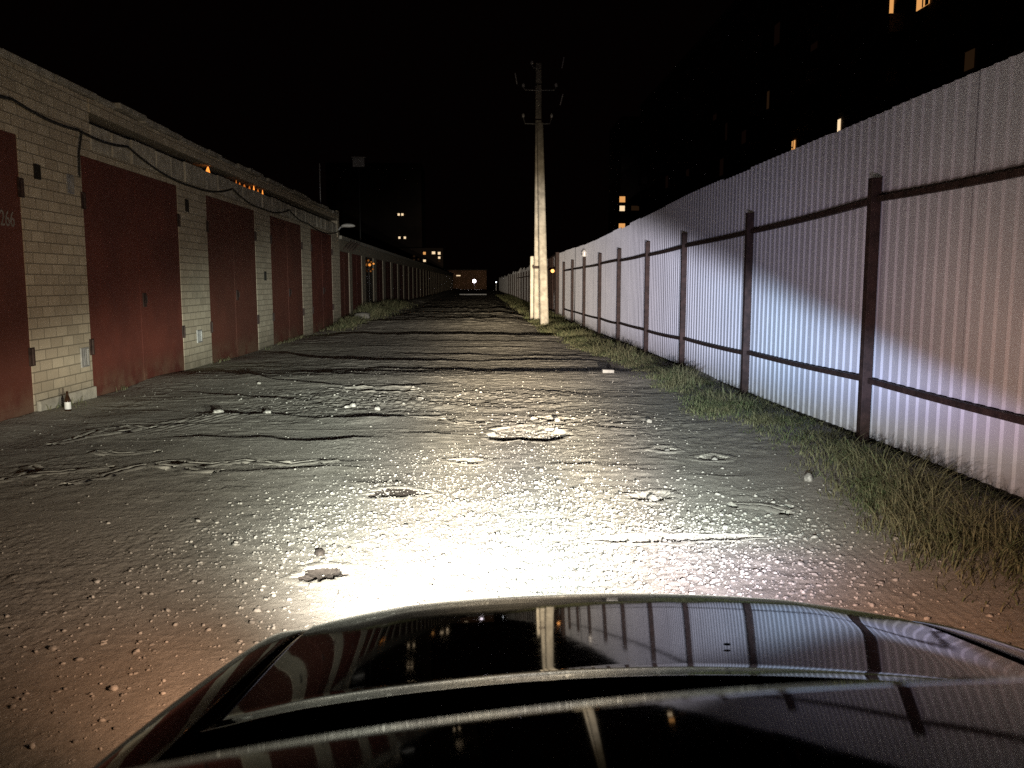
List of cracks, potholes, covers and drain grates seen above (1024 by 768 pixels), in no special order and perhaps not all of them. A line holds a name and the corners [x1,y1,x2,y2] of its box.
pothole [688,452,738,463]
pothole [440,457,493,466]
crack [0,425,339,485]
pothole [354,485,444,500]
pothole [479,424,579,443]
pothole [278,561,363,586]
pothole [617,489,682,505]
